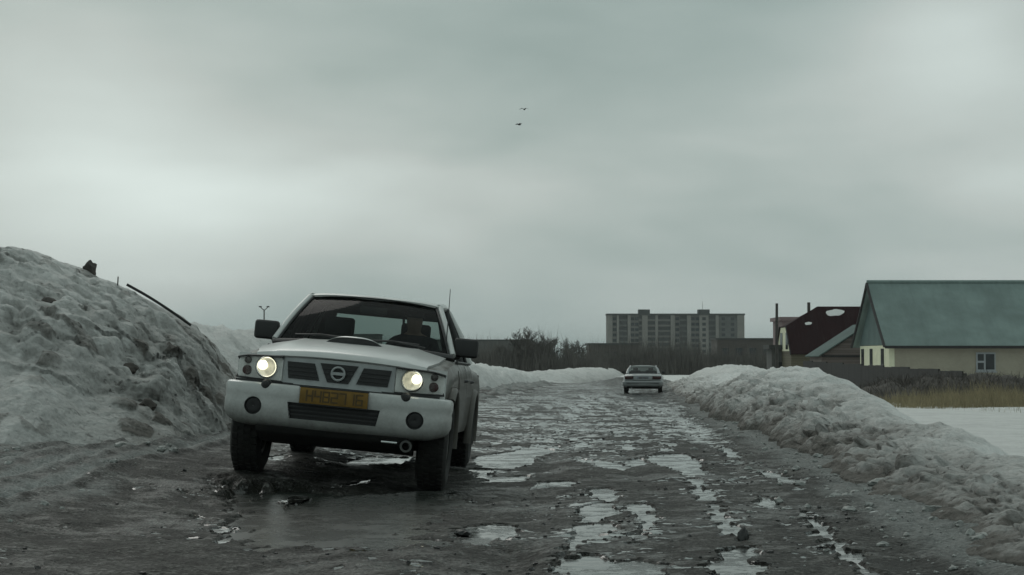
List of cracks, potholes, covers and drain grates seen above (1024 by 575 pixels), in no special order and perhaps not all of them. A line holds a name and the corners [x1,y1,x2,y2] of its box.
pothole [470,446,567,469]
pothole [183,479,476,552]
pothole [616,501,665,544]
pothole [643,453,712,476]
pothole [448,522,525,545]
pothole [796,510,891,575]
pothole [336,476,380,488]
pothole [582,486,625,502]
pothole [545,552,676,575]
pothole [546,501,626,560]
pothole [532,479,578,487]
